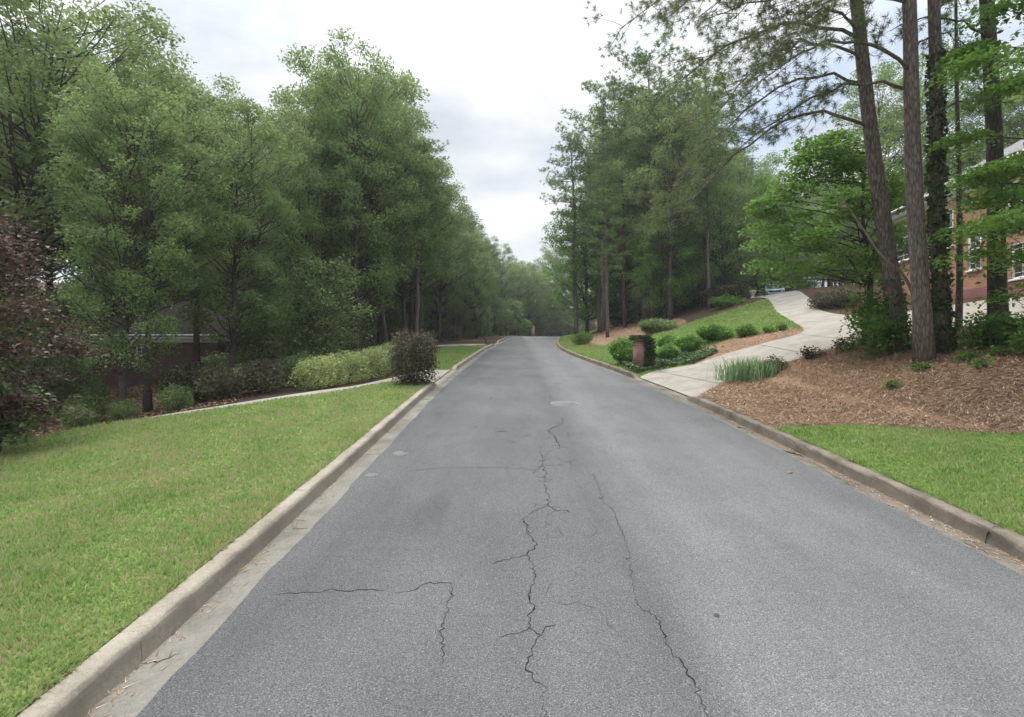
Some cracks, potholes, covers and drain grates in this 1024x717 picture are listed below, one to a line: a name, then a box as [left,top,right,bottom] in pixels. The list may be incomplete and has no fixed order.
crack [278,582,454,663]
crack [414,418,614,715]
